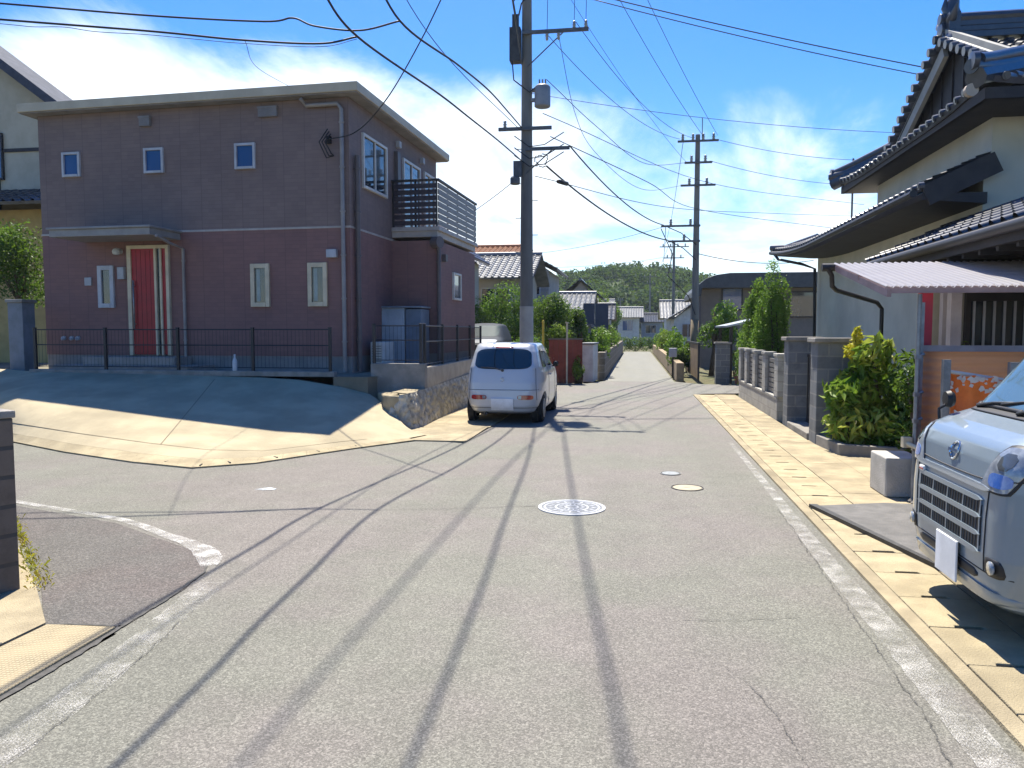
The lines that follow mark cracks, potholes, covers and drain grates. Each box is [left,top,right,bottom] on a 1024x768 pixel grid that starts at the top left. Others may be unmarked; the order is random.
manhole cover [538,500,606,516]
crack [721,664,808,765]
